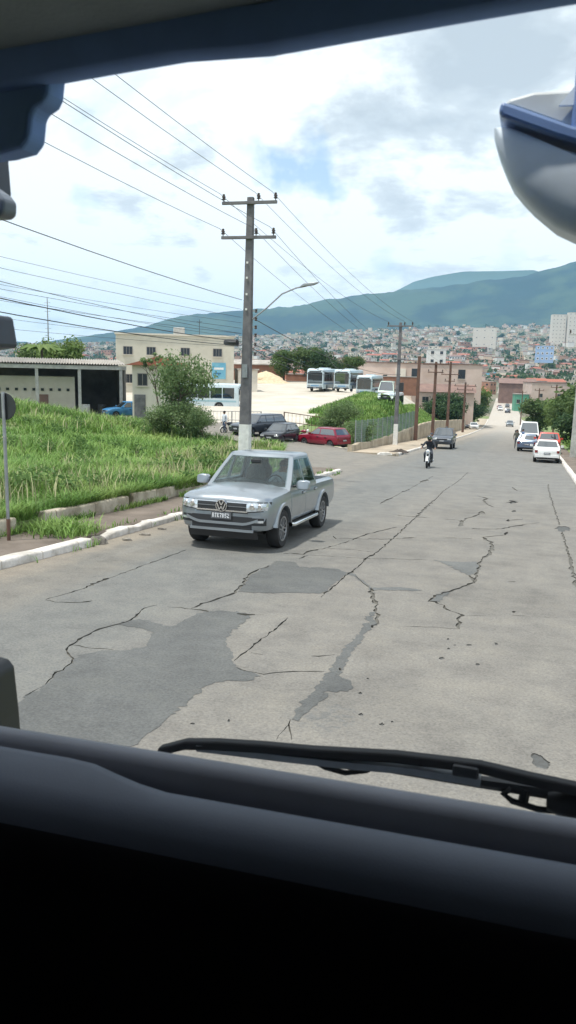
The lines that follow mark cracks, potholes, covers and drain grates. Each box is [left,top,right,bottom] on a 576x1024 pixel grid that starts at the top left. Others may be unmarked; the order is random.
crack [47,550,185,603]
pothole [531,753,550,769]
crack [548,485,576,587]
crack [28,605,155,695]
crack [172,474,533,675]
